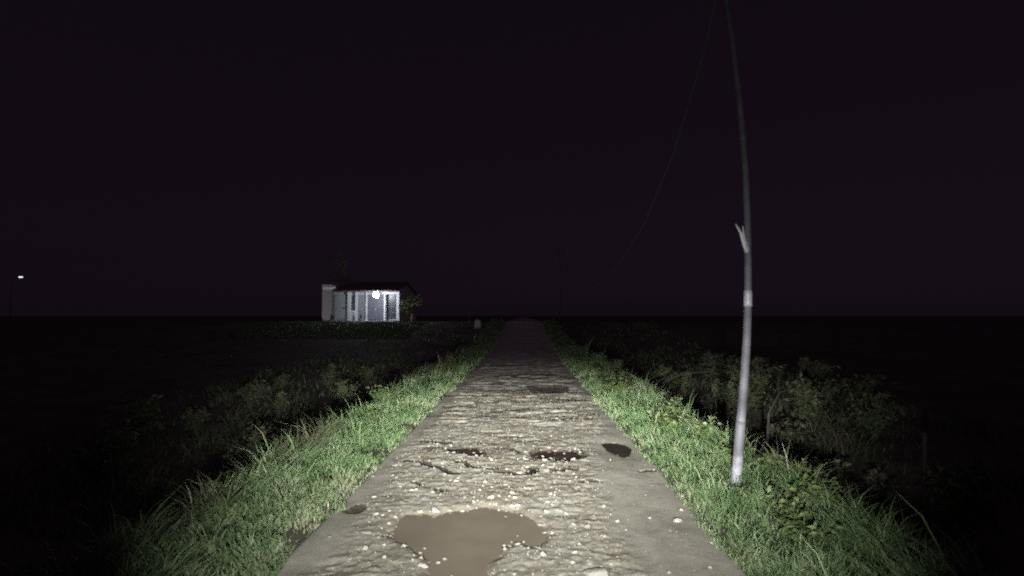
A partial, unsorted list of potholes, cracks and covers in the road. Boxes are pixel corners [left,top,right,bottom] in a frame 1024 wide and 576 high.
pothole [602,443,632,457]
pothole [381,501,559,576]
crack [403,435,527,492]
pothole [342,504,366,514]
pothole [439,446,492,457]
pothole [525,385,570,394]
pothole [525,447,590,463]
